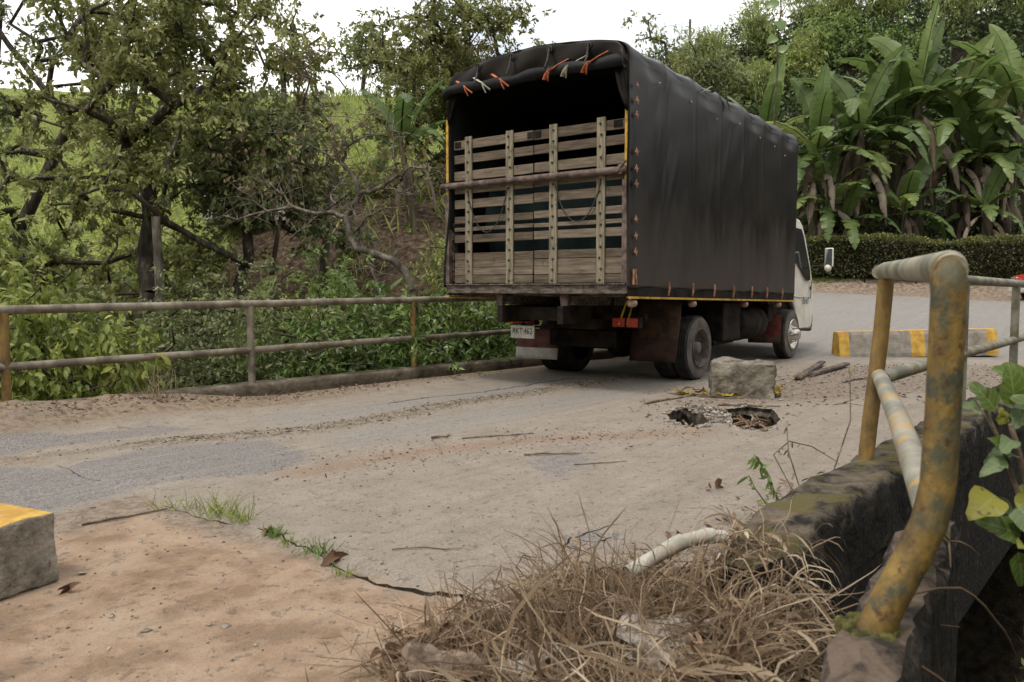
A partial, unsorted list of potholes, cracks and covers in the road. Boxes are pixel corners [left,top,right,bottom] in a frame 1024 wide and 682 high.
pothole [718,404,780,432]
crack [392,378,570,403]
pothole [662,406,715,428]
